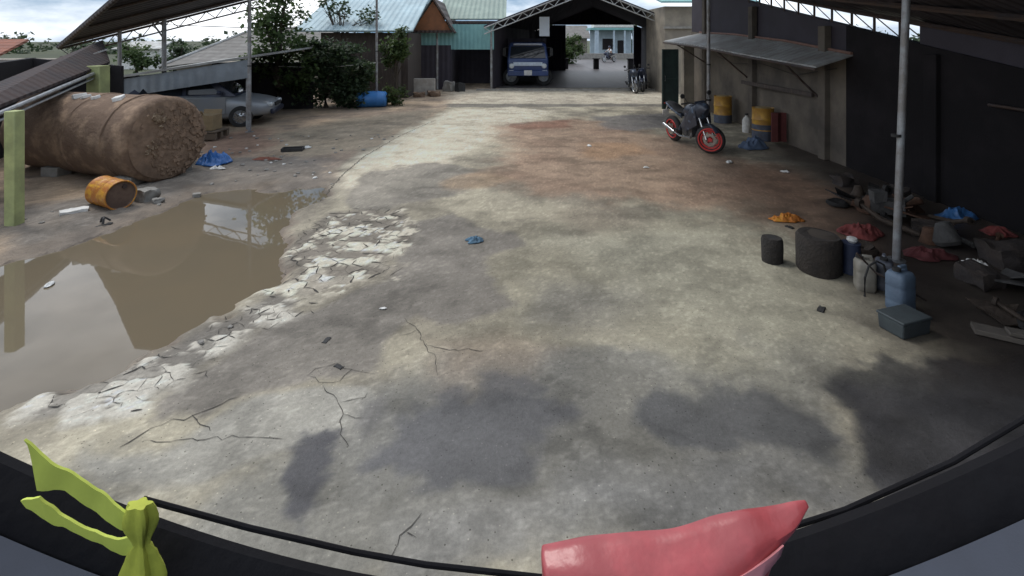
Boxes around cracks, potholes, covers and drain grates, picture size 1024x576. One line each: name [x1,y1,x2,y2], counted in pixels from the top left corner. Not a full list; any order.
crack [307,363,374,446]
crack [122,397,281,446]
crack [48,206,417,417]
